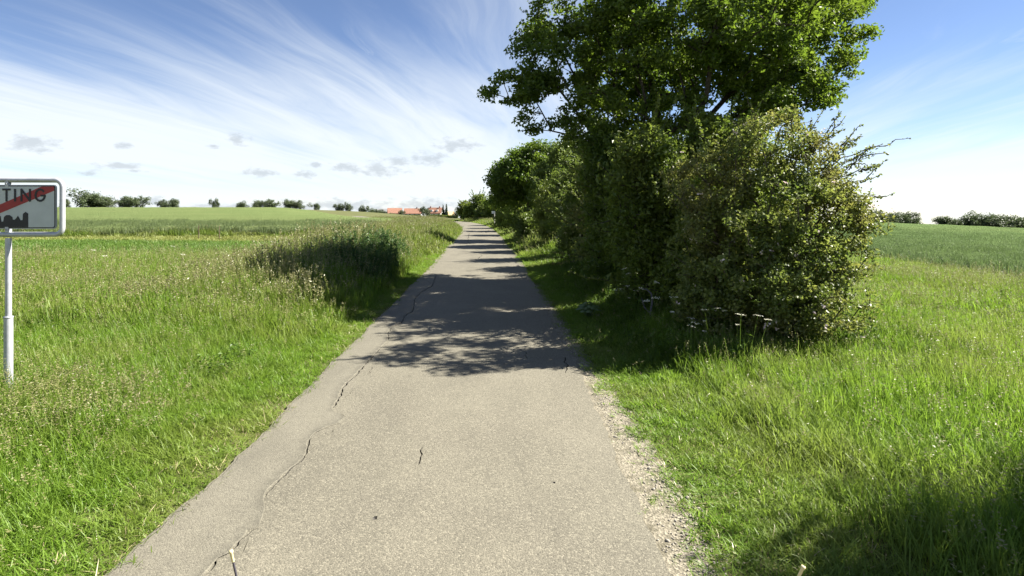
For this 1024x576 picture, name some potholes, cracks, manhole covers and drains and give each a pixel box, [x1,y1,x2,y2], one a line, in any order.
crack [266,277,436,496]
